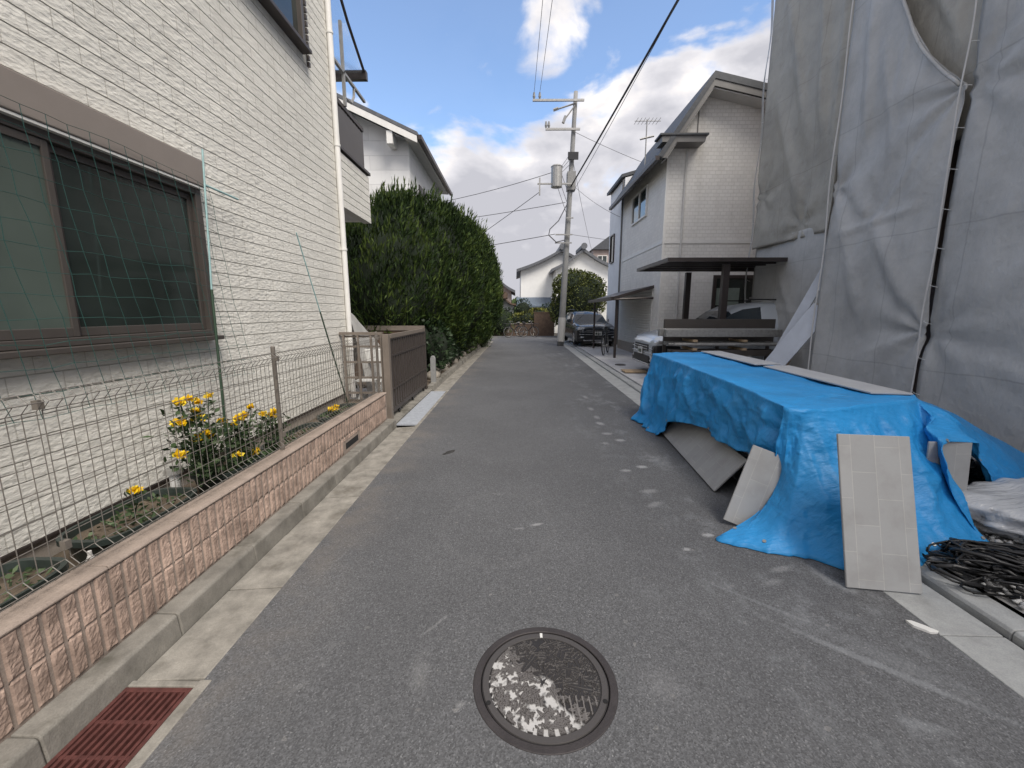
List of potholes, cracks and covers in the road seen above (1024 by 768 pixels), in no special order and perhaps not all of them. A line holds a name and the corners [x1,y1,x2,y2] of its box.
manhole cover [473,627,618,756]
drain grate [43,687,193,768]
